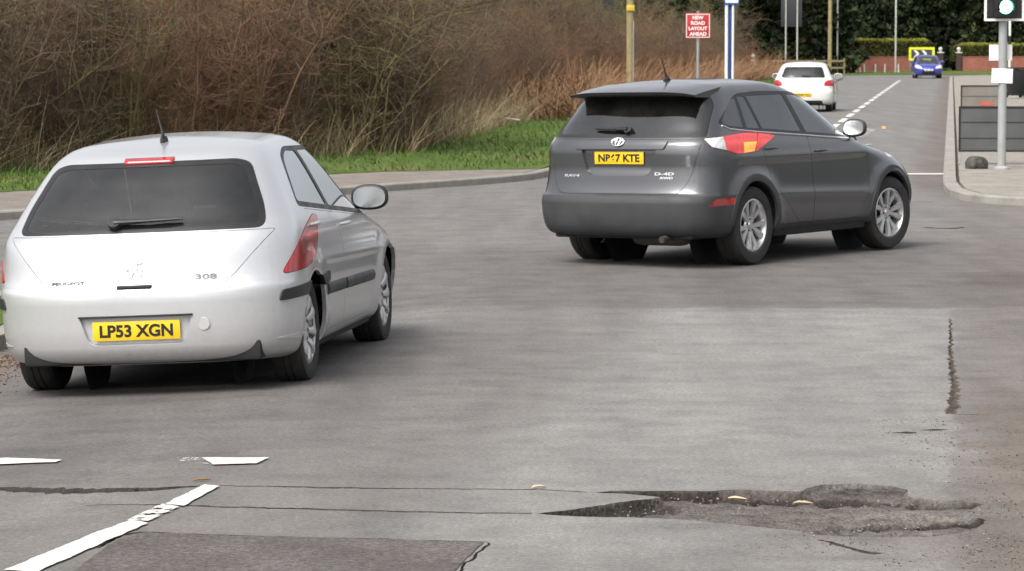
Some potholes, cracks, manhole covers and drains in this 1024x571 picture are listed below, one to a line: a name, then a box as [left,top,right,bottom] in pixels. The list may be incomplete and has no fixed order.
crack [819,540,883,555]
crack [944,318,989,415]
pothole [535,484,986,537]
